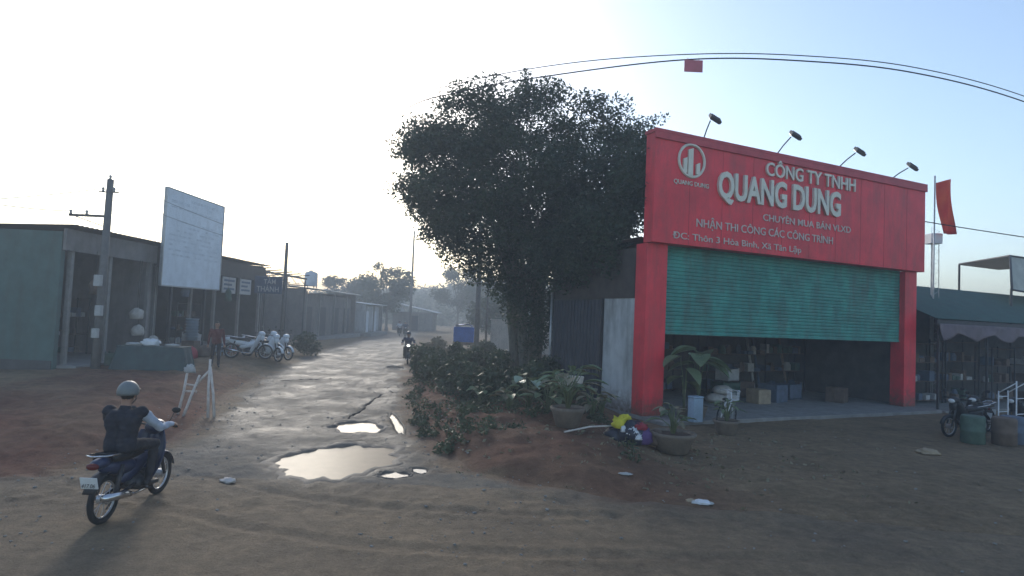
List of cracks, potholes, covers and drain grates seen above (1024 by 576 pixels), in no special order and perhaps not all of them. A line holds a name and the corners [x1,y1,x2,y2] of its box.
pothole [323,420,388,434]
pothole [388,412,406,436]
pothole [260,441,408,484]
crack [348,394,381,418]
